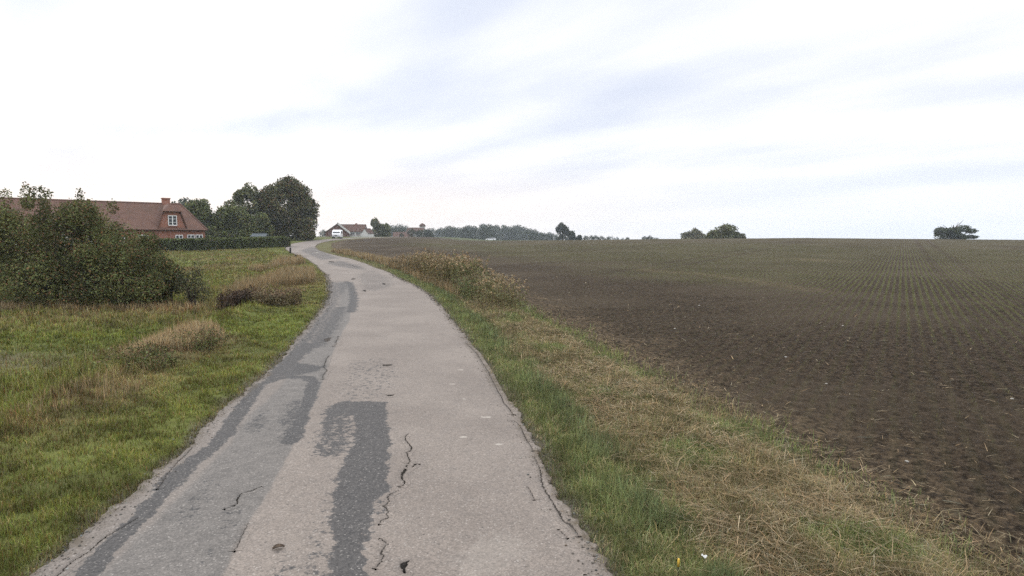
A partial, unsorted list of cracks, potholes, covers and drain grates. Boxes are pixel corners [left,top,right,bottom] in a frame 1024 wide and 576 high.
crack [368,433,421,569]
crack [318,336,343,380]
crack [224,486,264,552]
